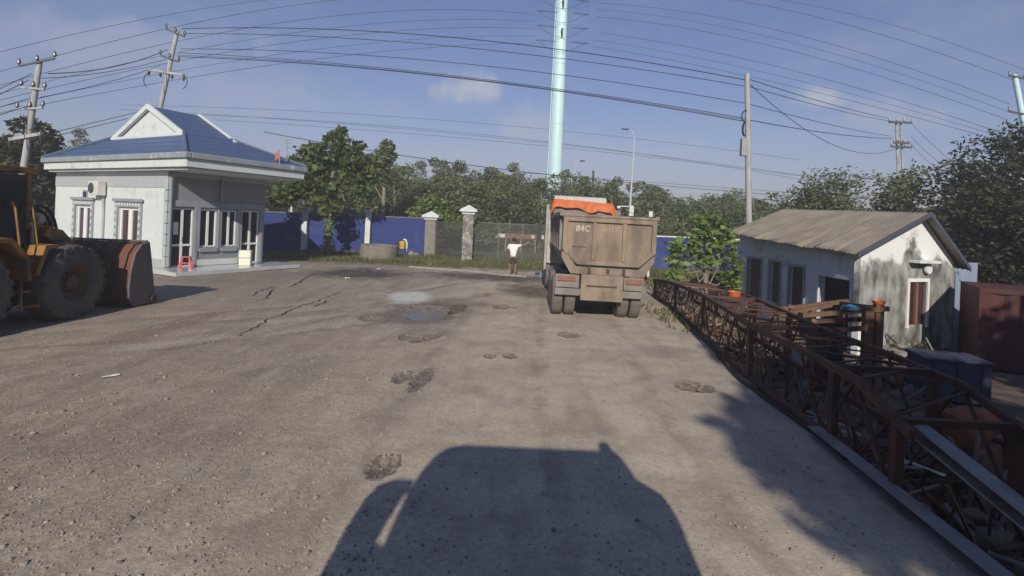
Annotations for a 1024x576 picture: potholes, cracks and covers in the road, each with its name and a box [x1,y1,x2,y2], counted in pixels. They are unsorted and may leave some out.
pothole [386,304,467,322]
pothole [476,352,500,361]
pothole [404,331,450,345]
crack [234,273,346,335]
pothole [402,366,442,396]
pothole [551,330,587,340]
pothole [350,449,414,488]
pothole [390,332,421,342]
pothole [663,380,725,397]
pothole [383,369,416,387]
pothole [352,315,391,323]
pothole [498,352,525,362]
